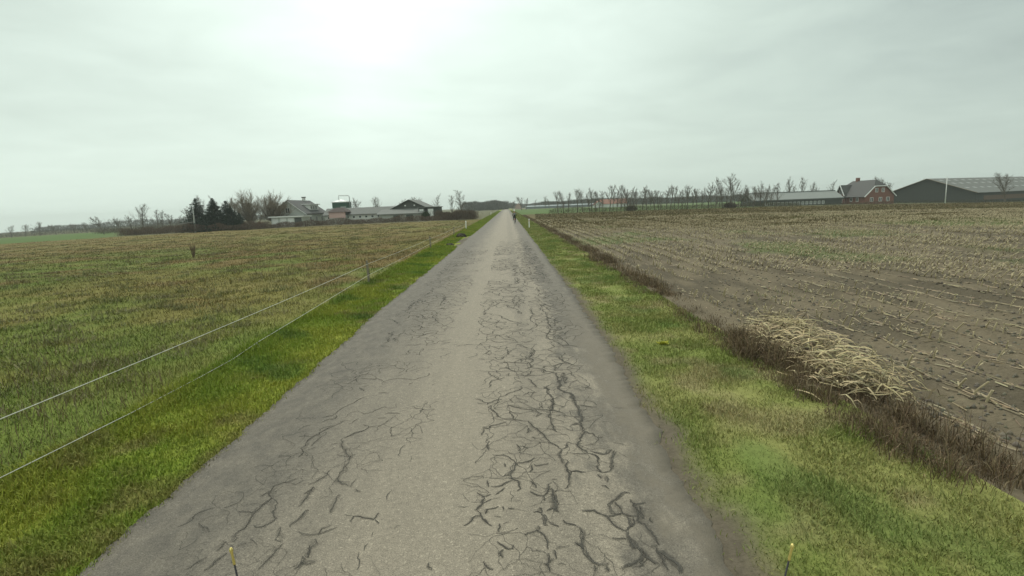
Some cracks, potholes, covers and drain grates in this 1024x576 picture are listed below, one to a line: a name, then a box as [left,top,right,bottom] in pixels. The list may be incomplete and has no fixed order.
crack [161,244,488,576]
crack [458,241,682,576]
